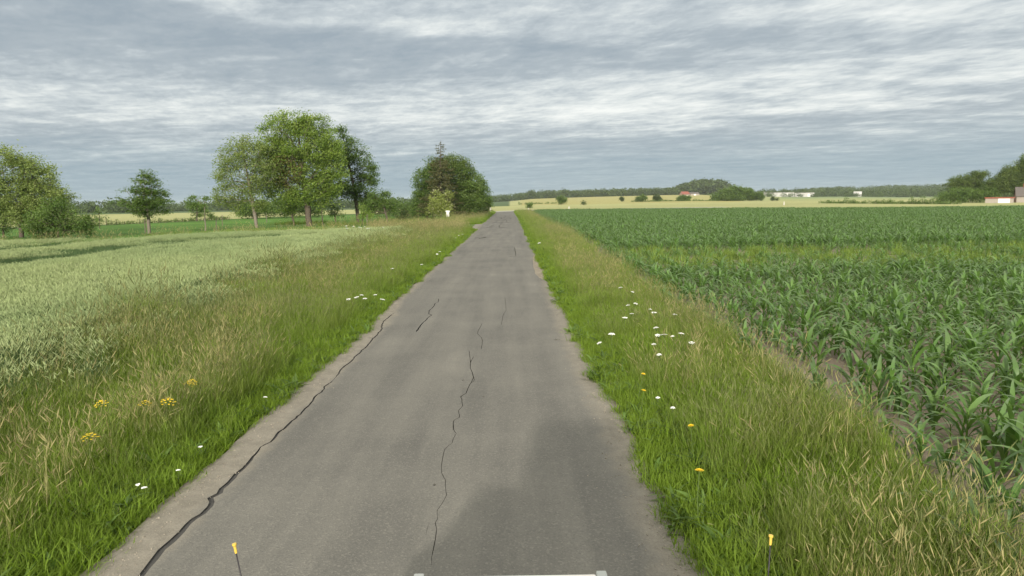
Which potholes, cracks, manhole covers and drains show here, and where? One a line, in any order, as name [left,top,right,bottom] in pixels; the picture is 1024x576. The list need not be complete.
crack [138,314,392,576]
crack [426,324,483,563]
